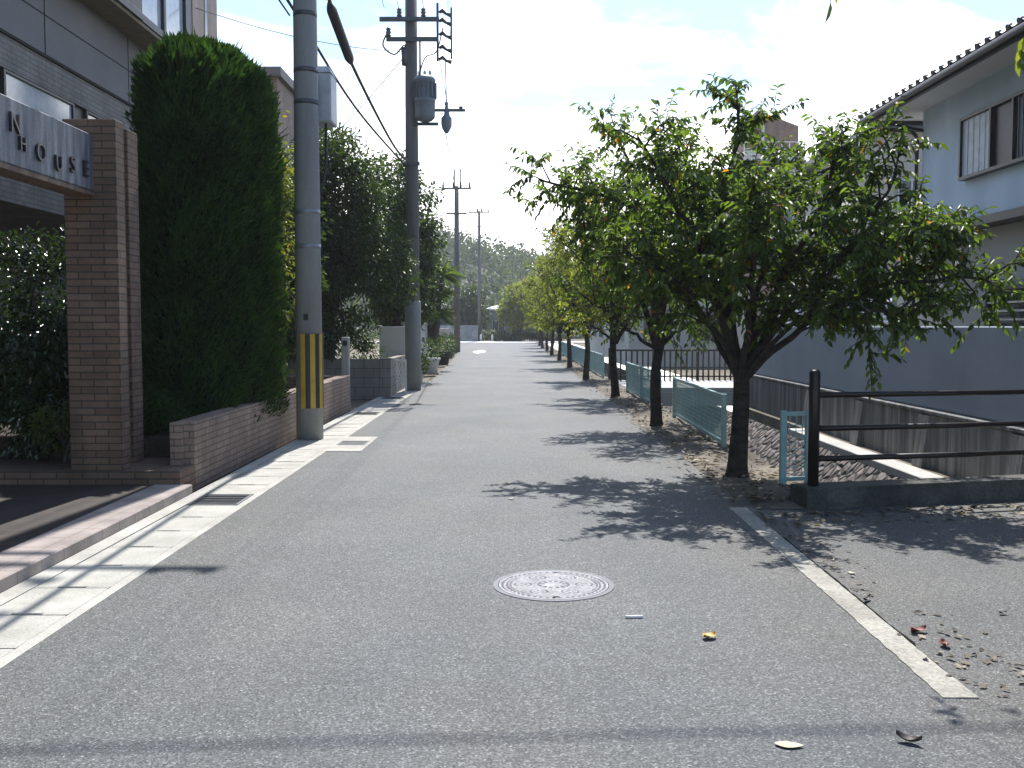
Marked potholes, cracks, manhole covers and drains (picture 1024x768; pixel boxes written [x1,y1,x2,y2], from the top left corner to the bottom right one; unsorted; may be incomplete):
manhole cover [493,570,614,602]
drain grate [186,494,254,505]
